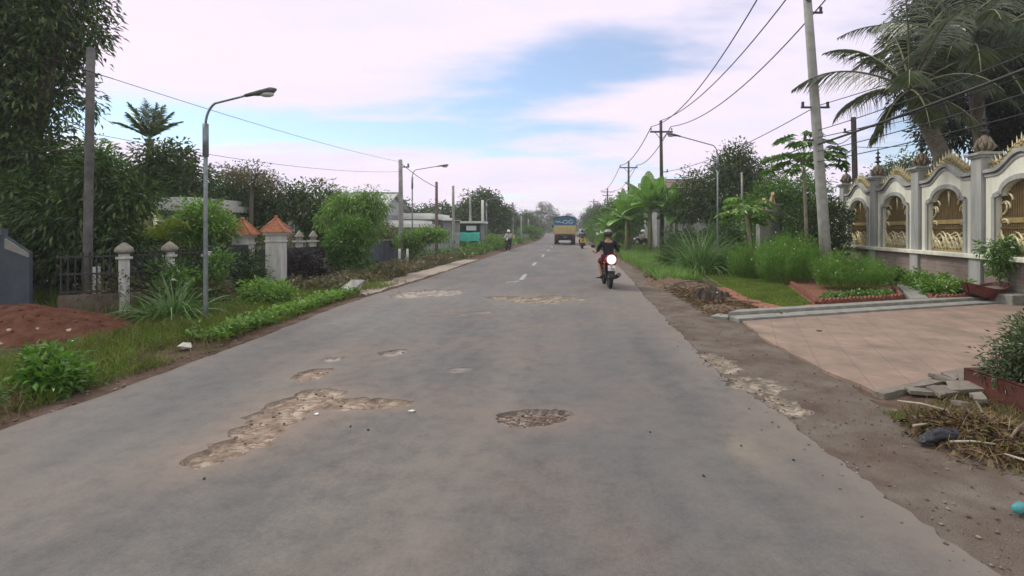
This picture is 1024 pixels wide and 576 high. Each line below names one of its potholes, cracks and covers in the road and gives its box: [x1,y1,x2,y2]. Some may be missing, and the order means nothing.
pothole [179,388,415,469]
pothole [496,409,574,428]
pothole [761,395,815,420]
pothole [484,295,588,304]
pothole [696,353,745,375]
pothole [377,349,408,357]
pothole [291,368,334,382]
pothole [724,376,790,397]
pothole [389,289,465,298]
